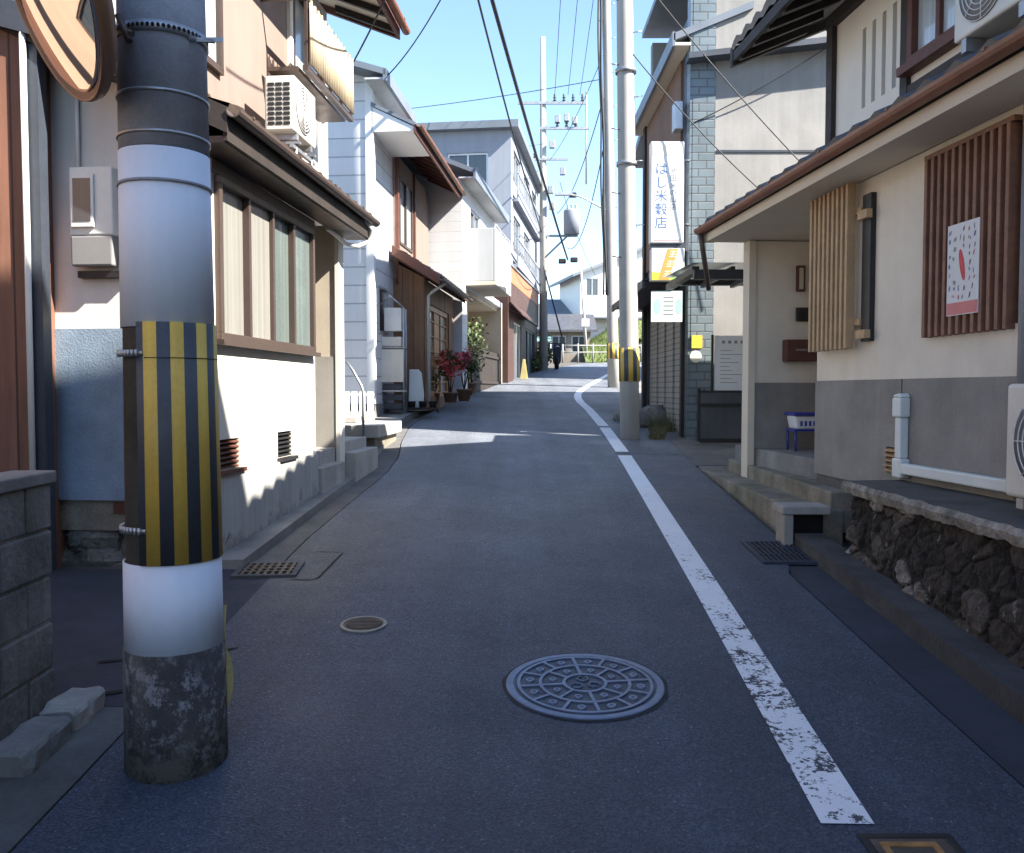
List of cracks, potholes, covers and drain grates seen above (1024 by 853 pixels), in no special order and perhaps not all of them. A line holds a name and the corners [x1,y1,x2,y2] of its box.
drain grate [230,561,305,579]
utility cover [857,833,966,853]
drain grate [740,540,817,565]
utility cover [340,616,387,634]
manhole cover [502,653,669,722]
